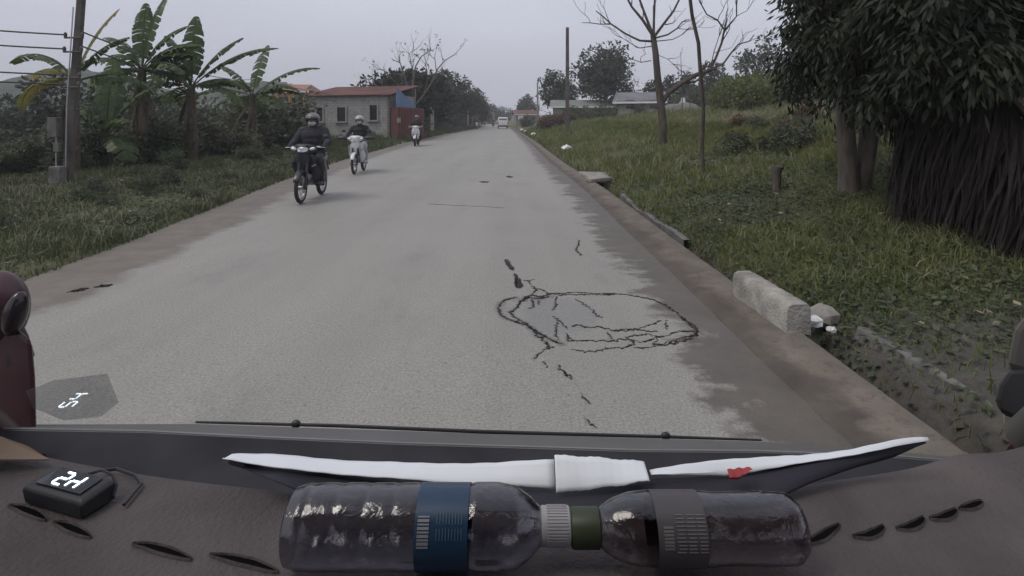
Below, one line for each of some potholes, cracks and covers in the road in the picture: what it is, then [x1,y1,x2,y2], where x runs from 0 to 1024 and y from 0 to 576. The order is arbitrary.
crack [497,279,699,379]
